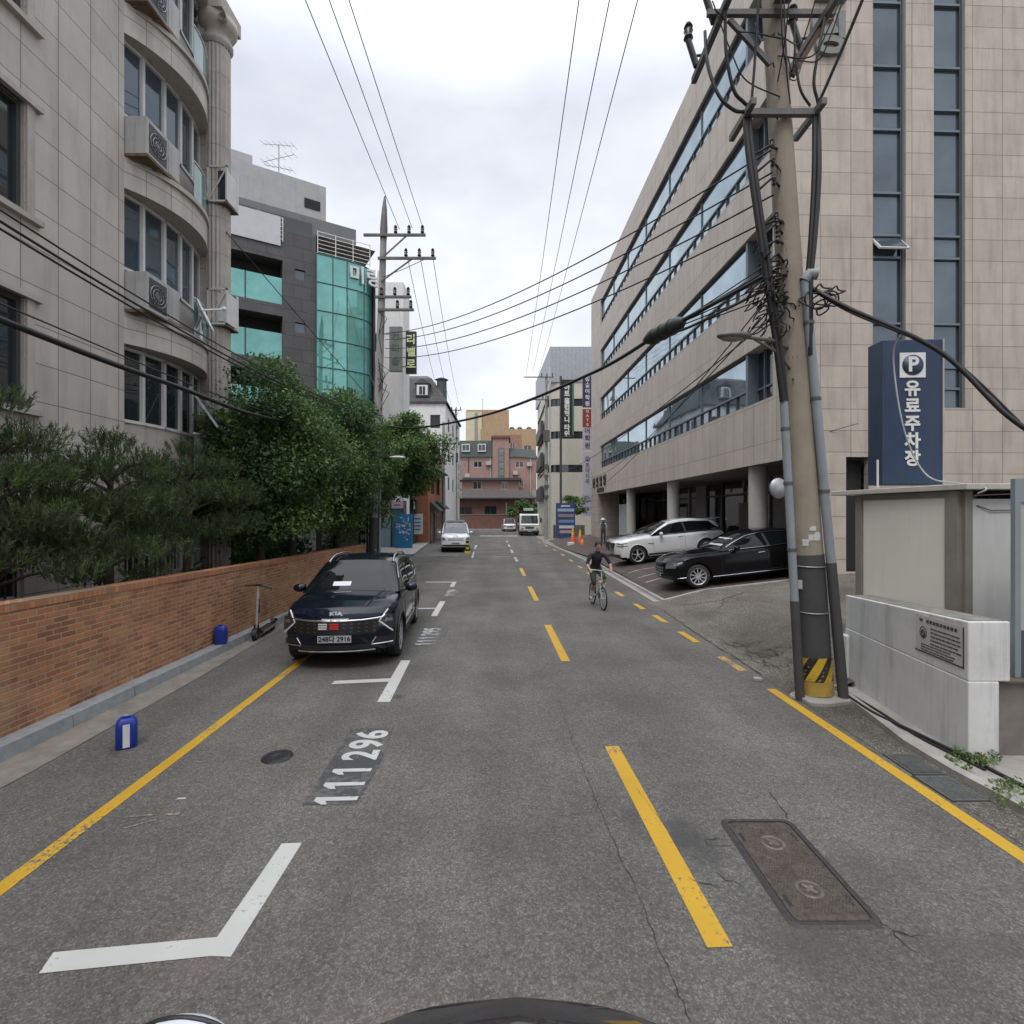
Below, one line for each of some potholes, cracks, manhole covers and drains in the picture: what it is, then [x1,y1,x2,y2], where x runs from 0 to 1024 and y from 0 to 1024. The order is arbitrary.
manhole cover [261,749,294,764]
crack [559,701,692,1023]
crack [716,637,792,668]
manhole cover [721,819,883,929]
